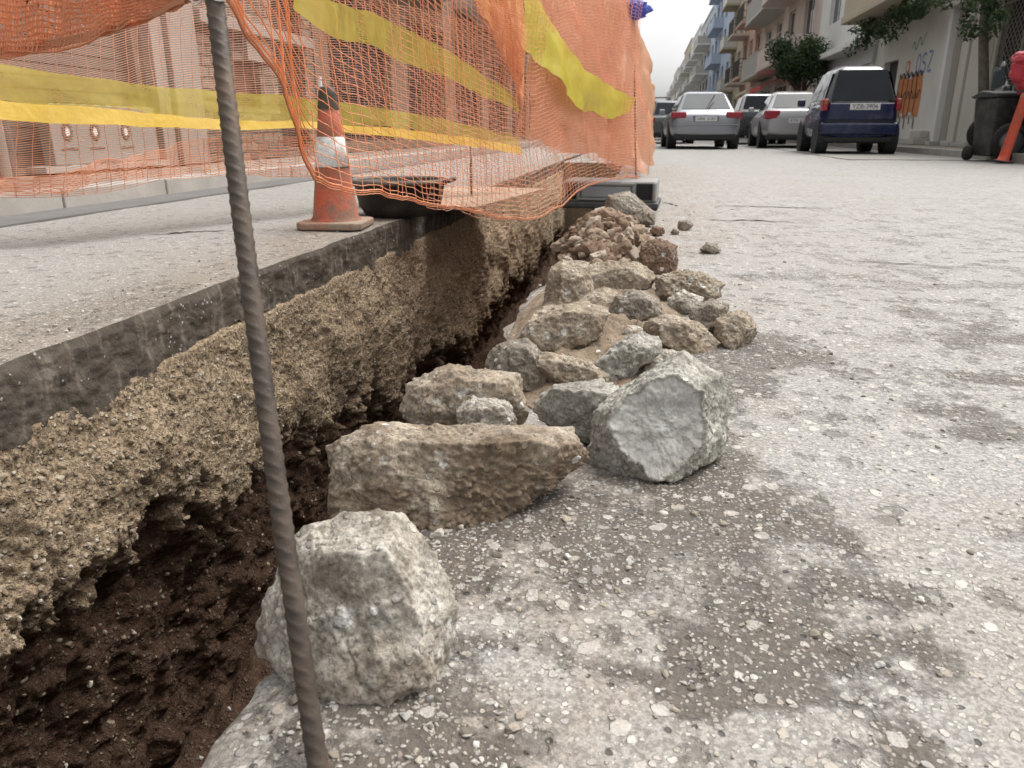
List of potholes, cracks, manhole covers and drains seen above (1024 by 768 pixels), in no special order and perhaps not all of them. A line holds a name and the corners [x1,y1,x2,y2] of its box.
crack [663,202,805,222]
